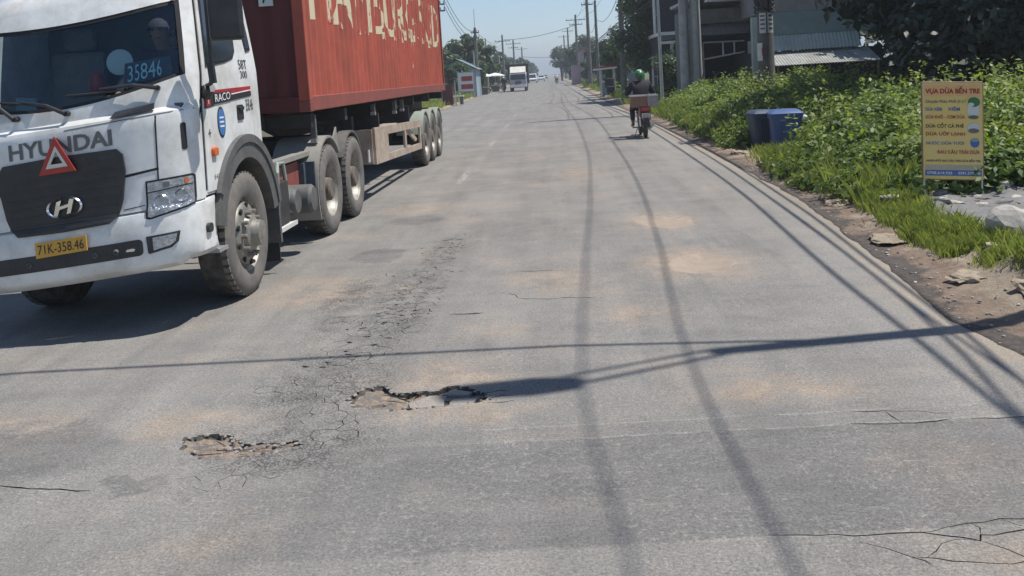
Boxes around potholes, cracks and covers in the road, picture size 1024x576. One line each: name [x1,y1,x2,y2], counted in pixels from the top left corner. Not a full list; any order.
crack [799,518,1024,565]
crack [850,410,1024,424]
crack [180,234,465,492]
pothole [179,433,304,460]
pothole [345,385,492,412]
